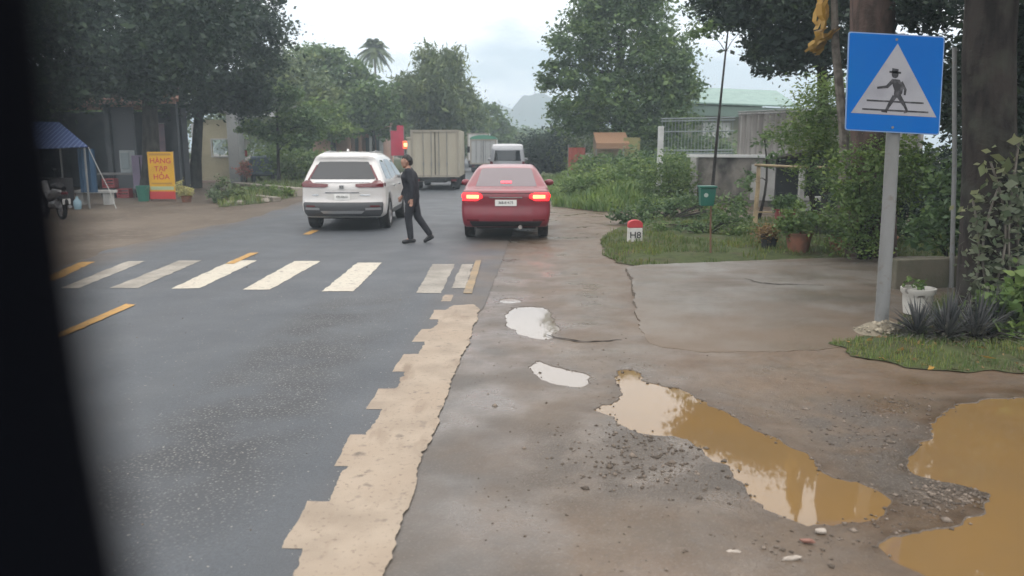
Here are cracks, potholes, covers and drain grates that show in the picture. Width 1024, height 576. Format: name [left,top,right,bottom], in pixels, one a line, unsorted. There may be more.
pothole [593,369,893,526]
pothole [504,306,562,339]
pothole [528,360,591,387]
pothole [877,397,1024,576]
